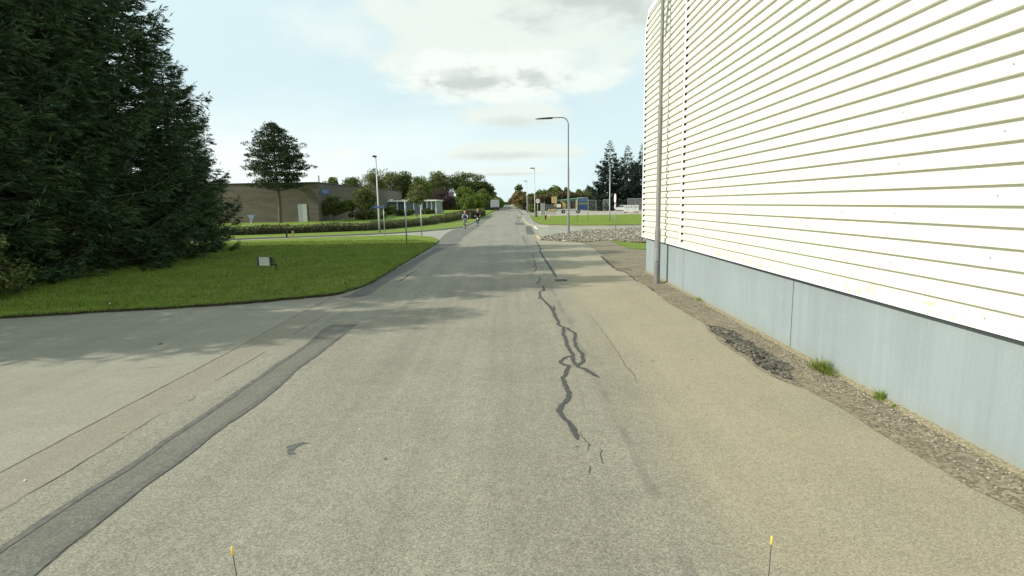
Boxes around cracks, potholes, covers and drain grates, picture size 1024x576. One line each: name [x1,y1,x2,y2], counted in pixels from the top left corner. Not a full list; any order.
crack [593,319,652,382]
